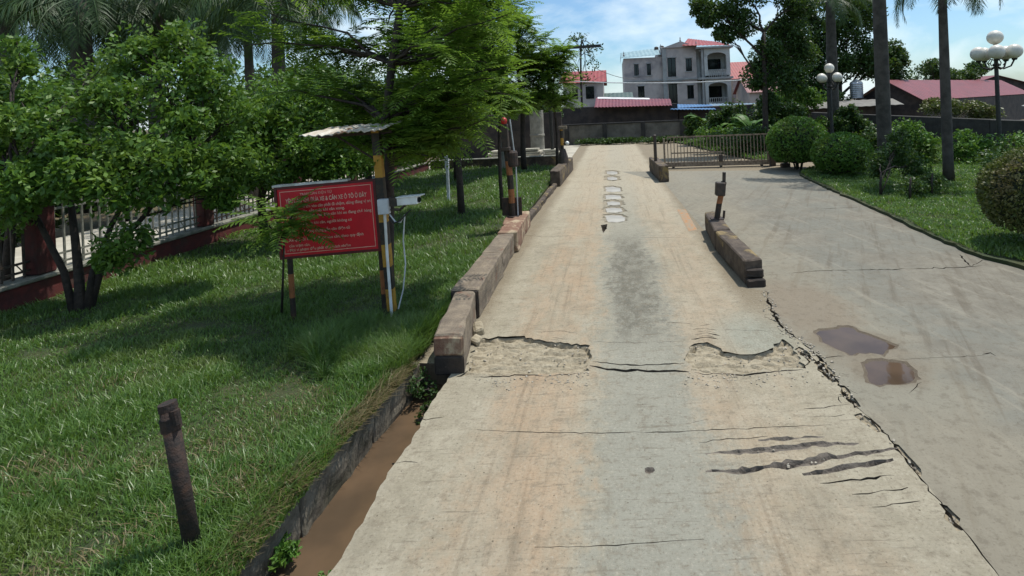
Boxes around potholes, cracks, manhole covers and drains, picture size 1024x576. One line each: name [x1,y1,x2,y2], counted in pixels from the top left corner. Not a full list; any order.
crack [485,293,999,576]
pothole [684,340,805,374]
pothole [459,337,592,377]
